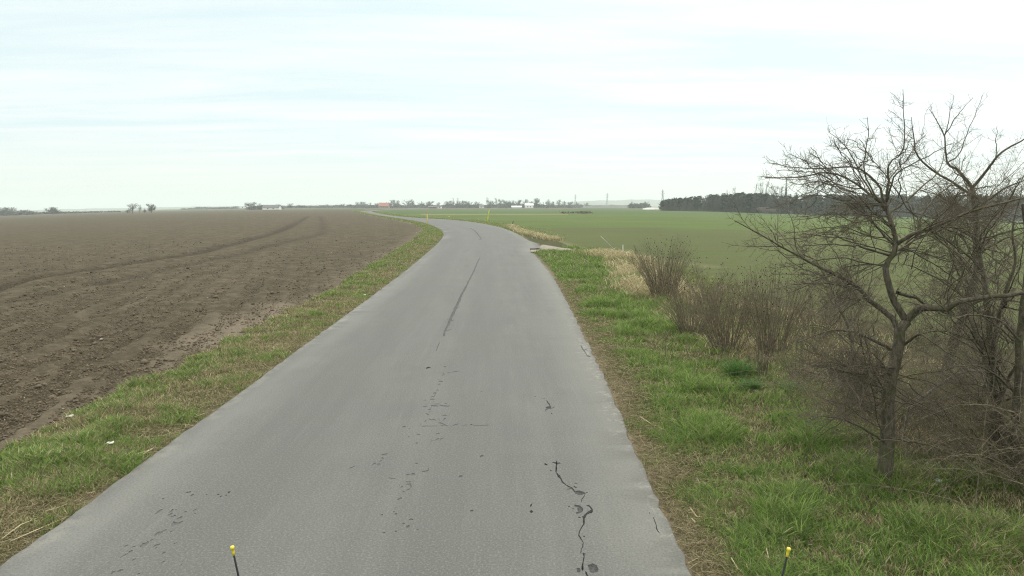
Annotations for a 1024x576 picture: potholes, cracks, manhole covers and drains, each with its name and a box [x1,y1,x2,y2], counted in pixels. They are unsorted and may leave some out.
crack [403,366,487,444]
crack [545,460,599,576]
